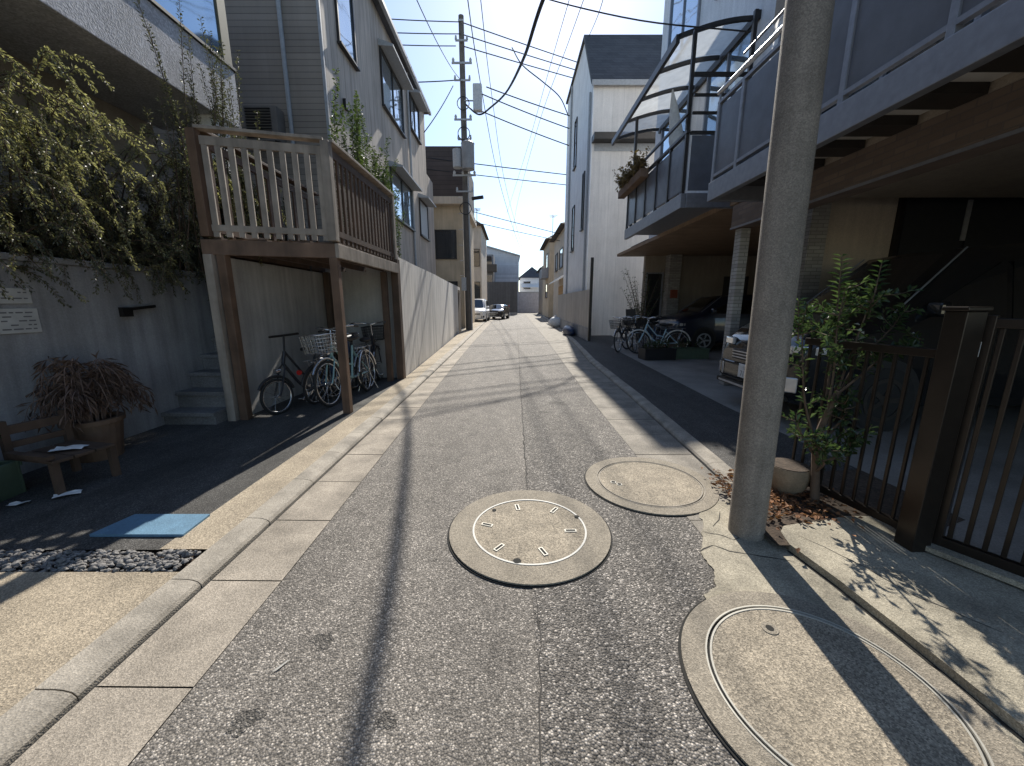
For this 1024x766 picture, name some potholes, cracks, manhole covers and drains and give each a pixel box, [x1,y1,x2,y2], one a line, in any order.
manhole cover [447,490,613,589]
manhole cover [678,591,1024,766]
manhole cover [584,457,719,517]
crack [699,513,790,561]
